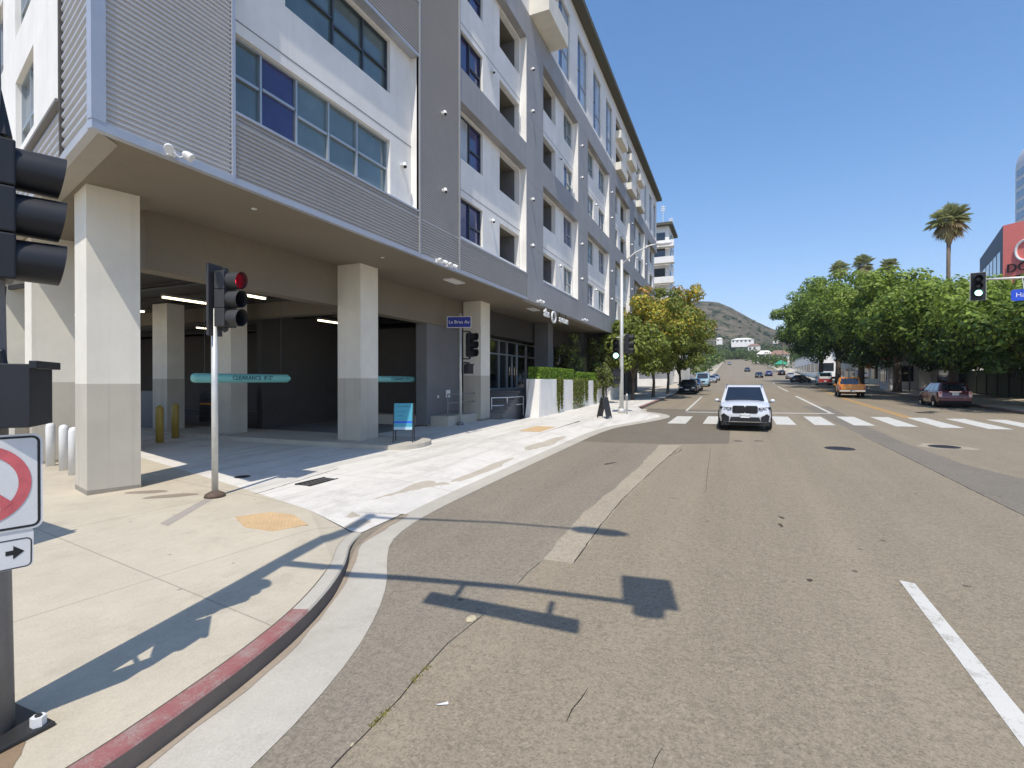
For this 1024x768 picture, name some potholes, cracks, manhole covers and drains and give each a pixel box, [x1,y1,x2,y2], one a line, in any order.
drain grate [295,477,338,486]
crack [574,448,681,563]
